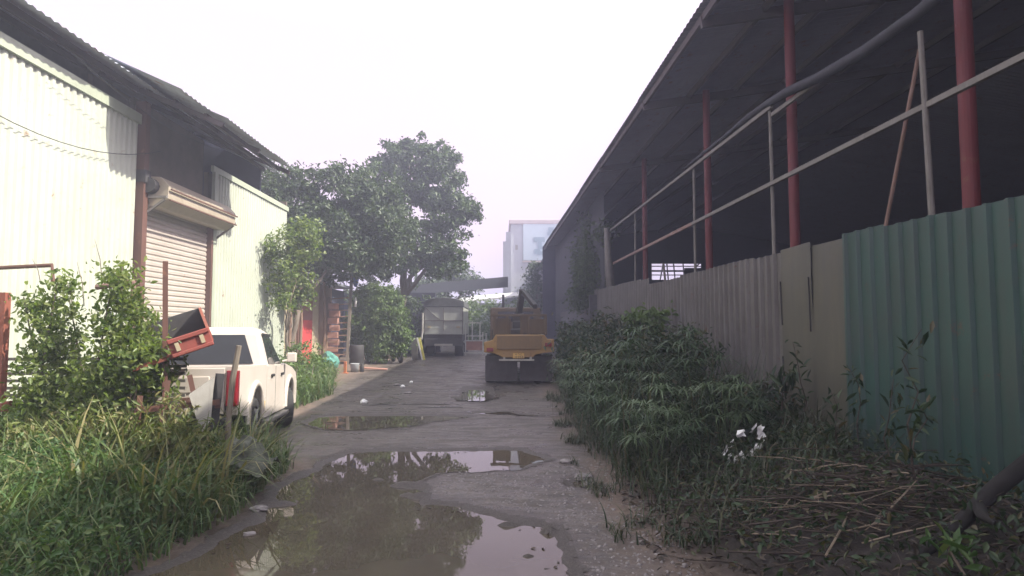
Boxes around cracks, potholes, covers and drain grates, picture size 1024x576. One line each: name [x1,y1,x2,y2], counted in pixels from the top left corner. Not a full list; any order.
pothole [128,446,588,576]
pothole [298,413,477,430]
pothole [451,385,499,402]
